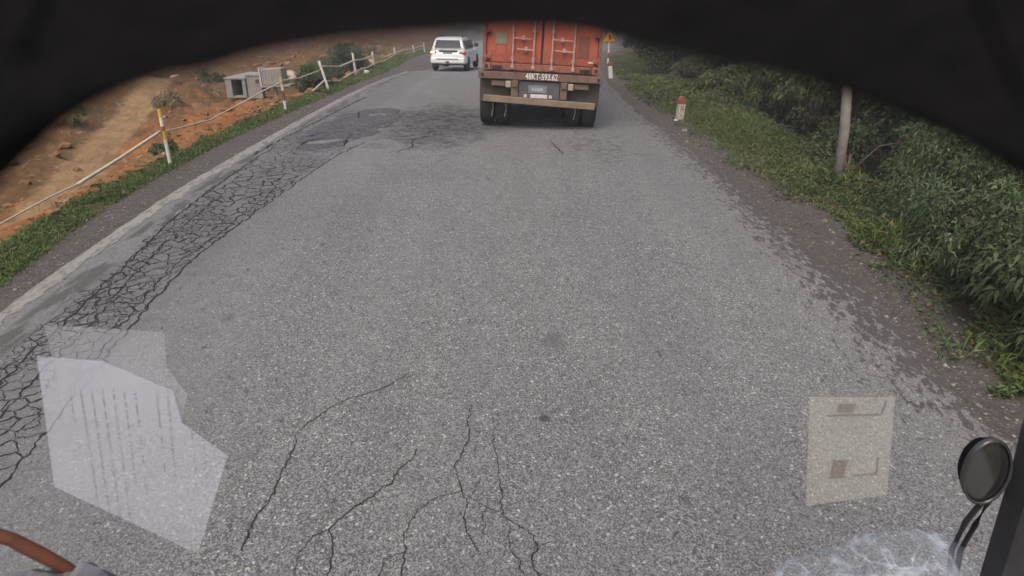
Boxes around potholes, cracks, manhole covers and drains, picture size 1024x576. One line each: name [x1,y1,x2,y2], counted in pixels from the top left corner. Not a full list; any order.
crack [240,372,412,551]
crack [294,407,557,576]
